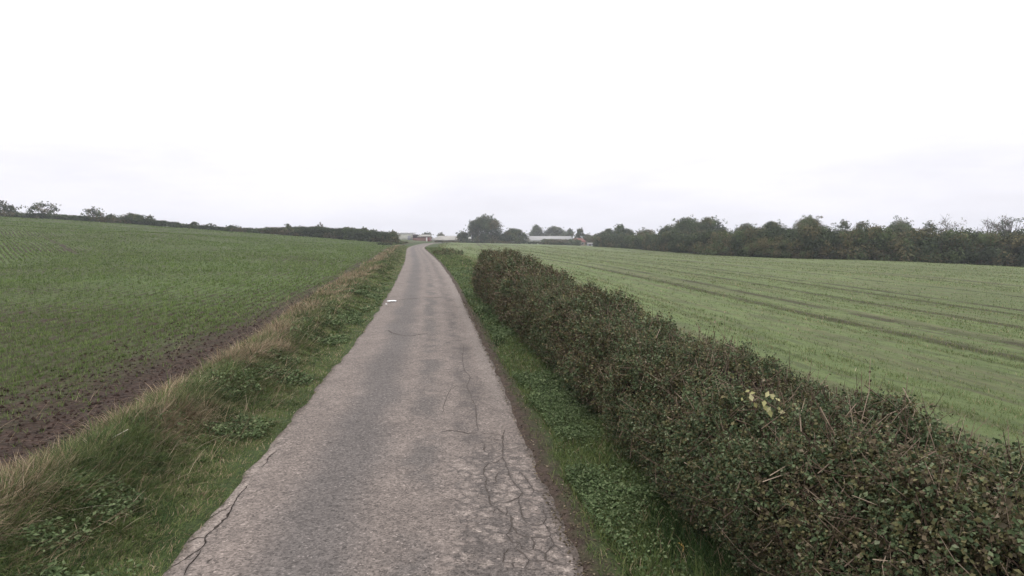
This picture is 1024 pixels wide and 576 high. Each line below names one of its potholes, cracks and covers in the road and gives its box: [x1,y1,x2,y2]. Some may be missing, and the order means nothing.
crack [171,443,278,576]
crack [443,346,566,570]
